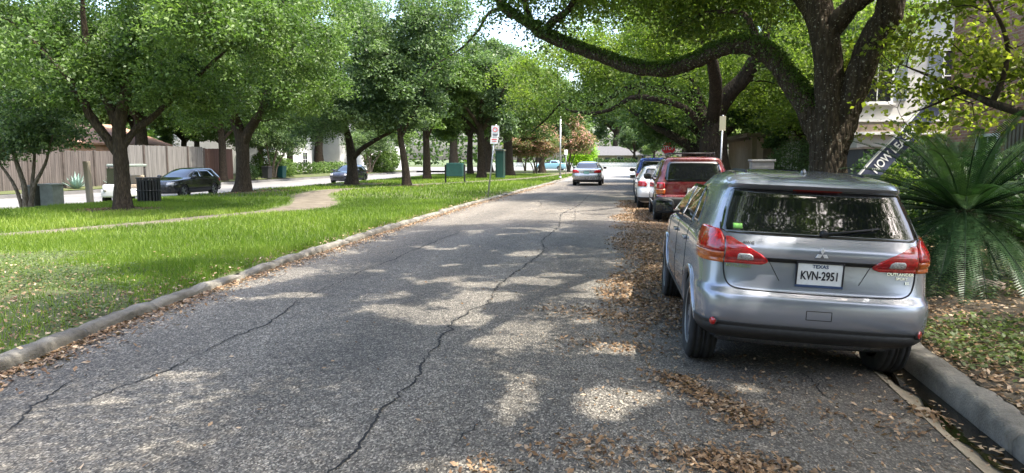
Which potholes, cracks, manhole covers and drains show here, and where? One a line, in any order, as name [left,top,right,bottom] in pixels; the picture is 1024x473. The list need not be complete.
crack [79,232,459,404]
crack [6,377,78,432]
crack [327,191,595,473]
